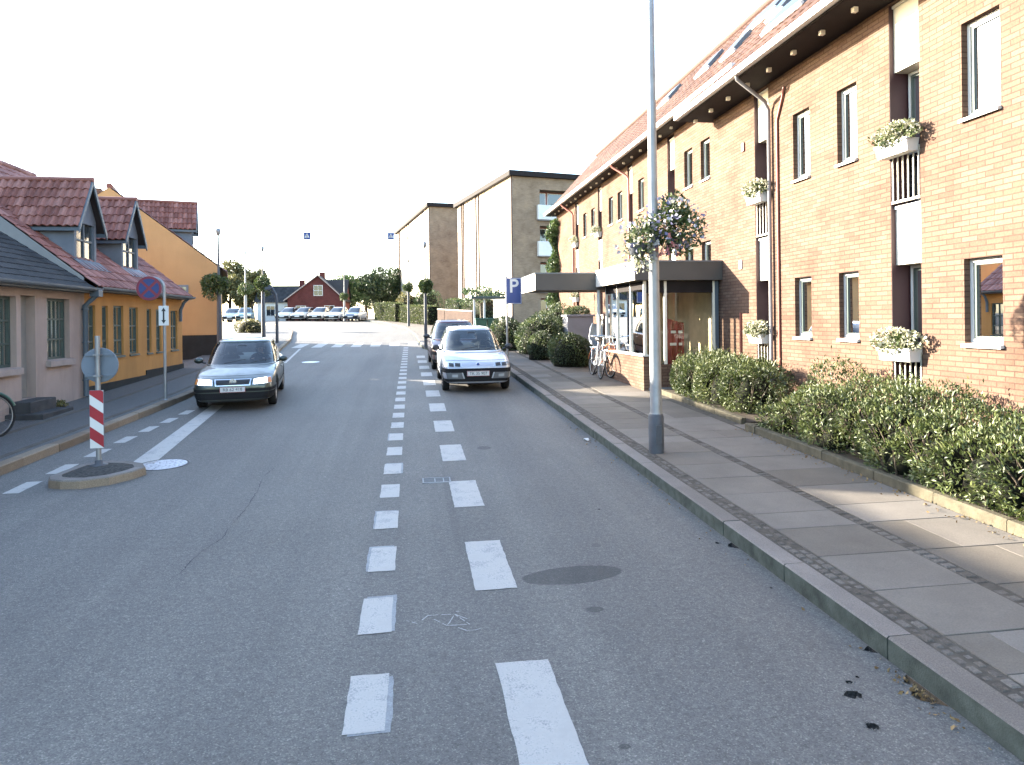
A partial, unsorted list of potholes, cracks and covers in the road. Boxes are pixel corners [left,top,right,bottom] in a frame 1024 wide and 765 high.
manhole cover [143,458,191,471]
crack [156,468,274,588]
